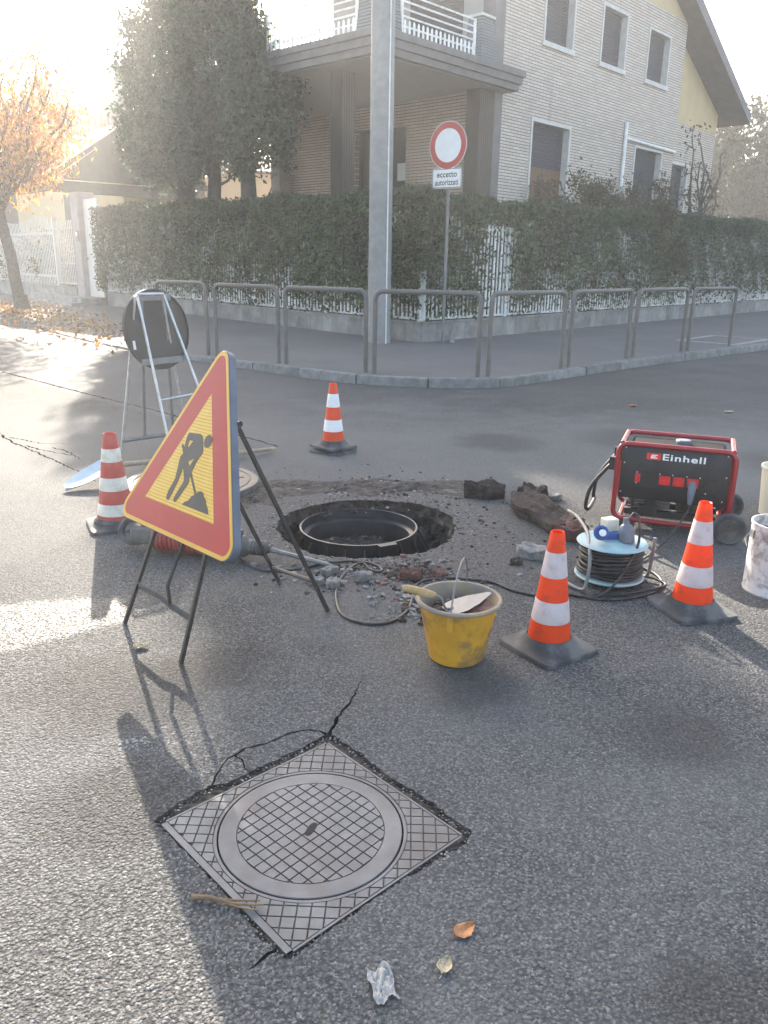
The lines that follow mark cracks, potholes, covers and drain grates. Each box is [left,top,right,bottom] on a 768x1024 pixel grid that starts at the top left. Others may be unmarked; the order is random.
crack [248,949,278,970]
crack [210,683,360,789]
manhole cover [160,742,464,957]
manhole cover [127,468,259,496]
manhole cover [291,508,431,559]
